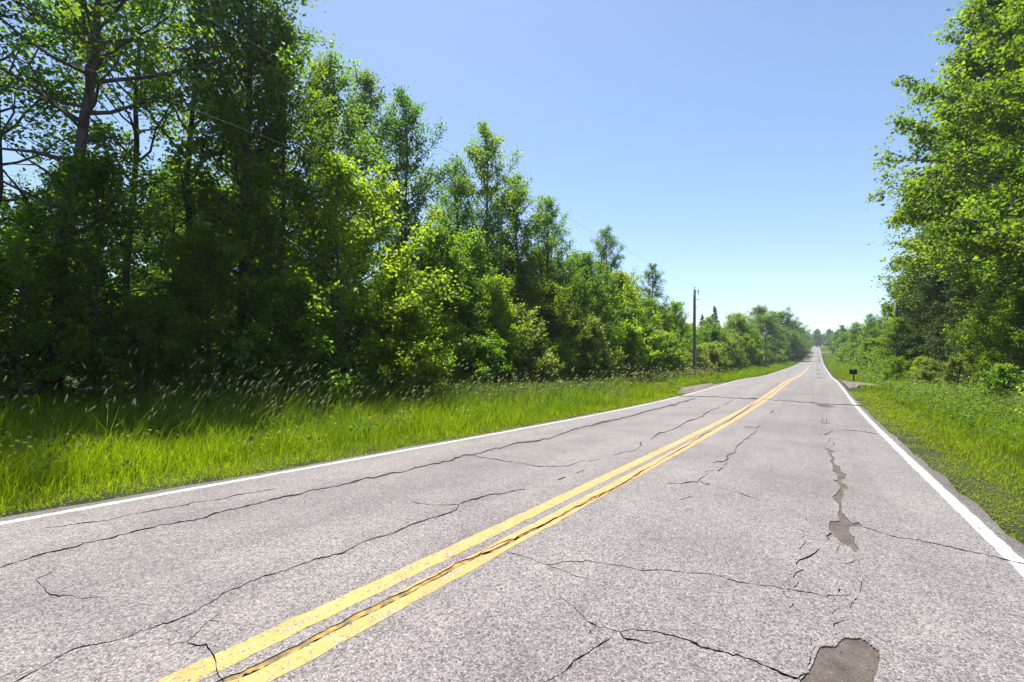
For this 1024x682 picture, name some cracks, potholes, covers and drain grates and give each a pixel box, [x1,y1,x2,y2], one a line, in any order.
pothole [800,637,880,682]
pothole [826,448,862,553]
crack [0,398,862,682]
crack [865,527,1024,564]
